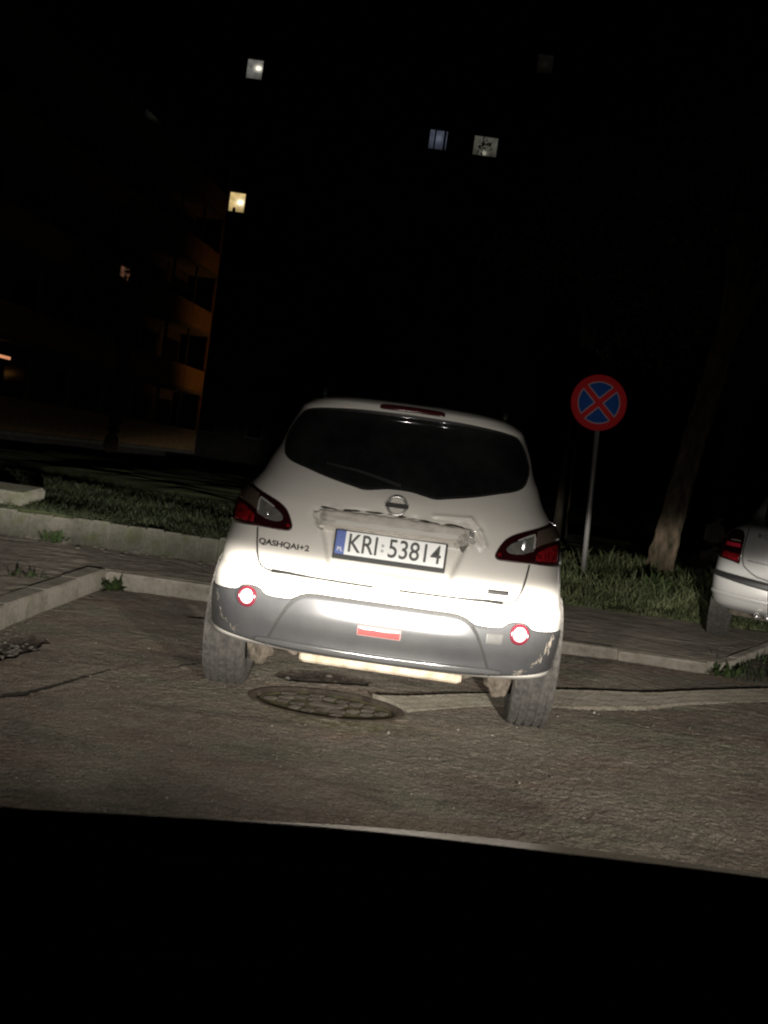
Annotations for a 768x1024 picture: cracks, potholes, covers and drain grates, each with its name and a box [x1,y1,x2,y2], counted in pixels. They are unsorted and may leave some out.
manhole cover [248,686,404,722]
crack [0,667,124,698]
pothole [0,635,51,661]
